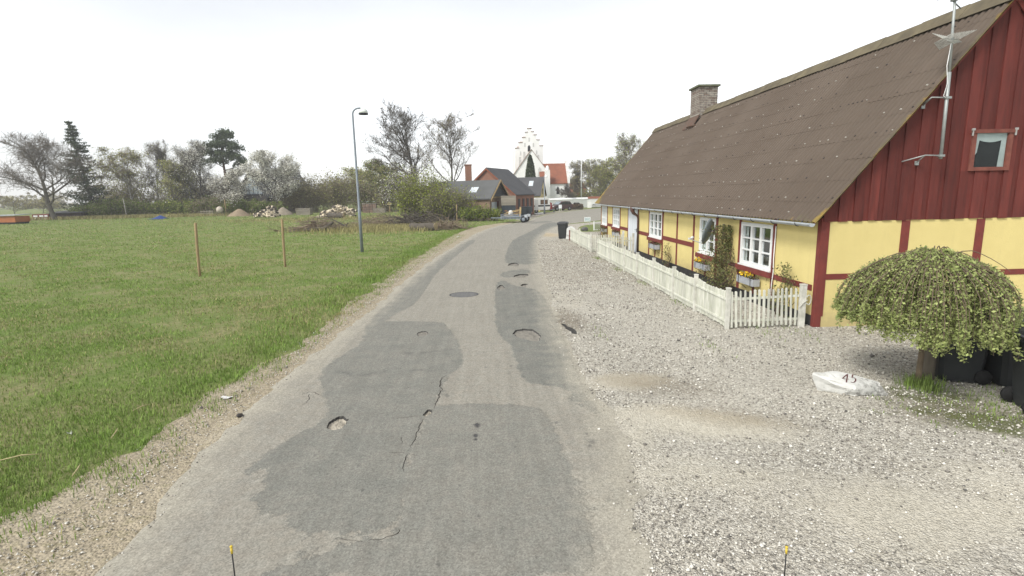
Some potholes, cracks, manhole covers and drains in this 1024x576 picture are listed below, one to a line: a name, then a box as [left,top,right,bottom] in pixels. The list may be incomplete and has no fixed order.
pothole [513,329,541,341]
pothole [327,416,349,430]
crack [392,375,446,472]
